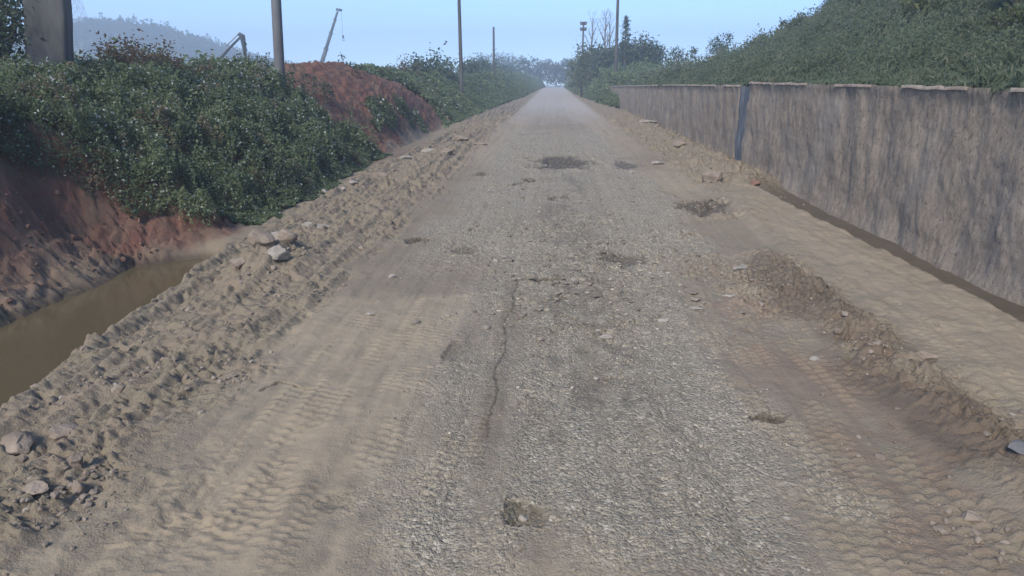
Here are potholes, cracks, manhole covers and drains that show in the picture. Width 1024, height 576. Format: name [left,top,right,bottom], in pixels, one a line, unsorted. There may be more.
pothole [440,336,467,367]
pothole [522,155,603,170]
pothole [593,249,651,270]
pothole [492,496,558,528]
pothole [671,199,756,218]
crack [484,280,520,439]
pothole [607,159,646,170]
pothole [742,411,802,425]
